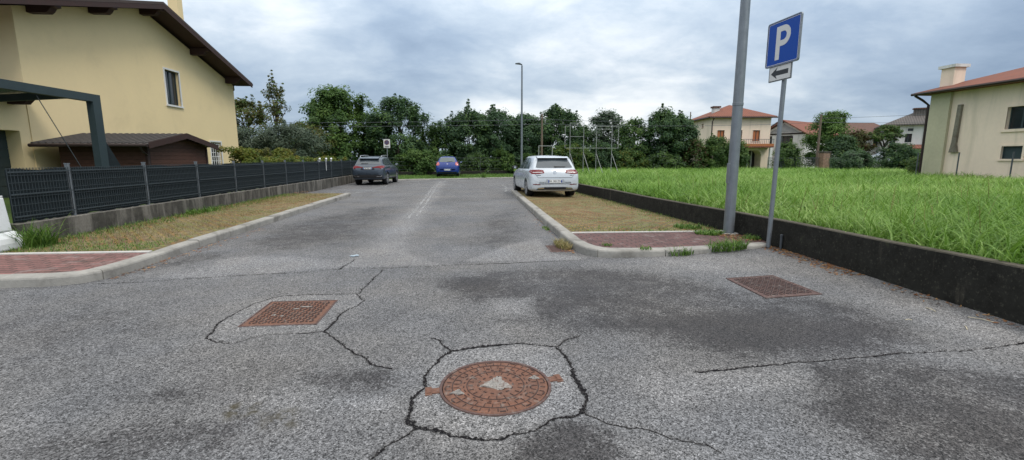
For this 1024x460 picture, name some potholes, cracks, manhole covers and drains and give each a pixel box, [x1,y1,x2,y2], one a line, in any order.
manhole cover [238,300,338,327]
manhole cover [726,275,822,299]
crack [370,337,722,460]
crack [697,342,1024,373]
manhole cover [425,361,564,417]
crack [205,269,392,369]
